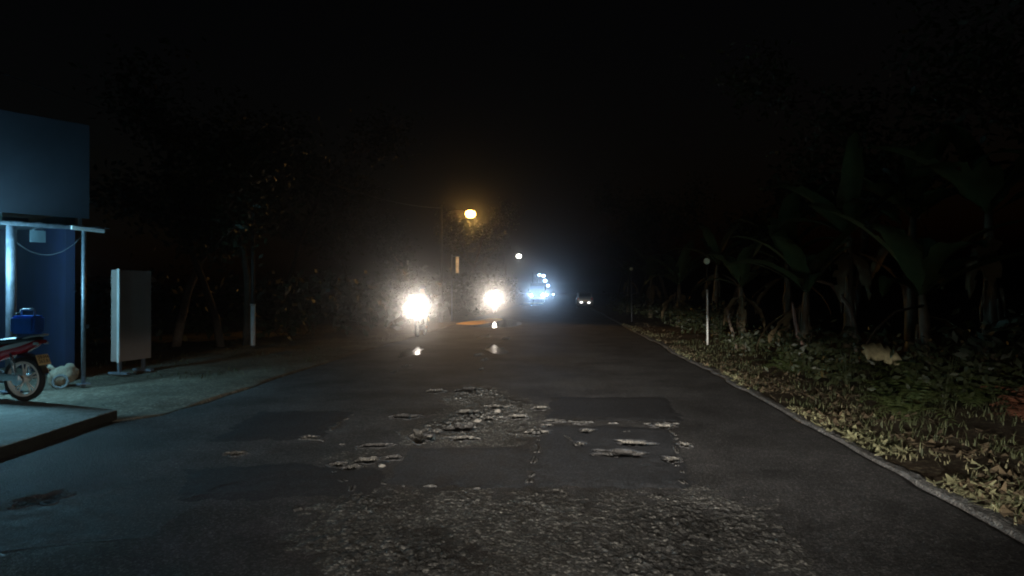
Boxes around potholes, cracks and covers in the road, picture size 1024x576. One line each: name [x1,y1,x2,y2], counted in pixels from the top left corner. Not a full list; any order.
pothole [405,428,437,445]
pothole [438,423,479,433]
pothole [325,461,349,469]
pothole [591,449,648,458]
pothole [352,456,384,465]
